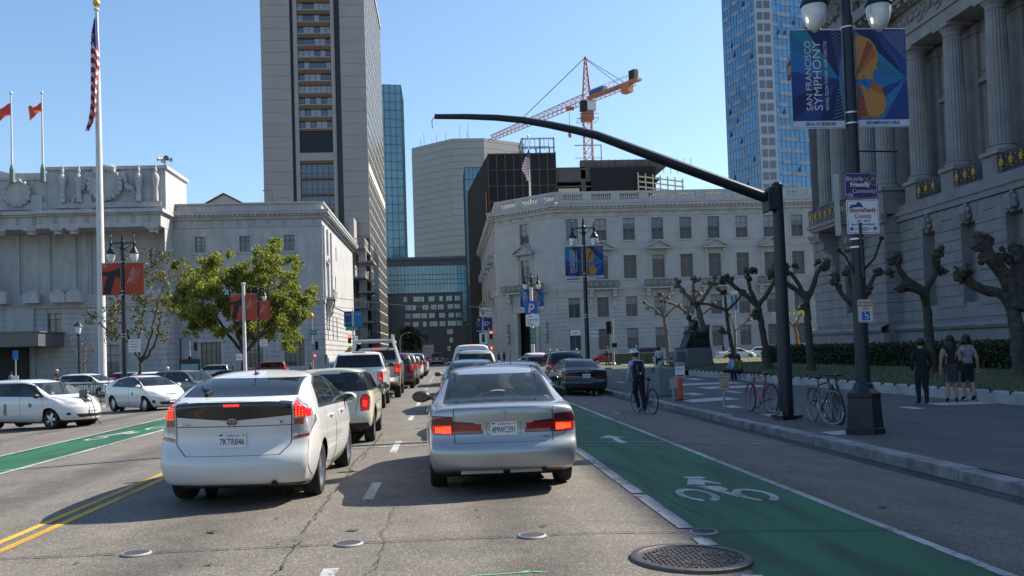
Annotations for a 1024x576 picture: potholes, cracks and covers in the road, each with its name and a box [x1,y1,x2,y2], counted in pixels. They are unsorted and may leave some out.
manhole cover [630,543,754,575]
manhole cover [334,539,364,547]
manhole cover [120,549,152,557]
